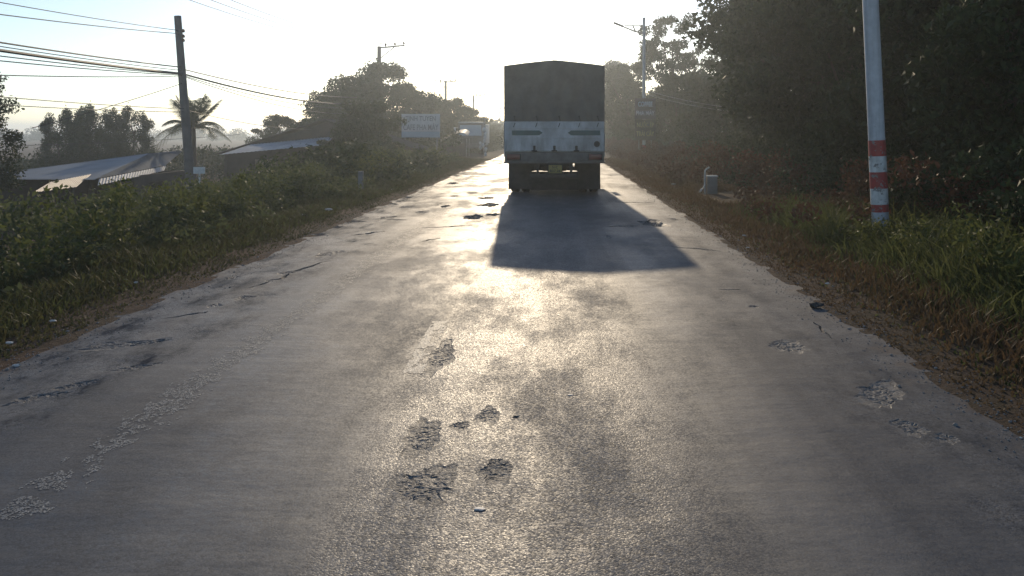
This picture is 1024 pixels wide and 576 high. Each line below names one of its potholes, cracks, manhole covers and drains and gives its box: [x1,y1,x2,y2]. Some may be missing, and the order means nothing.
pothole [473,405,500,426]
pothole [854,378,906,409]
pothole [424,337,456,378]
crack [250,261,327,288]
pothole [476,458,514,486]
pothole [385,463,458,507]
pothole [400,416,443,460]
pothole [935,433,961,445]
pothole [448,421,470,432]
pothole [768,339,811,355]
pothole [888,418,931,438]
